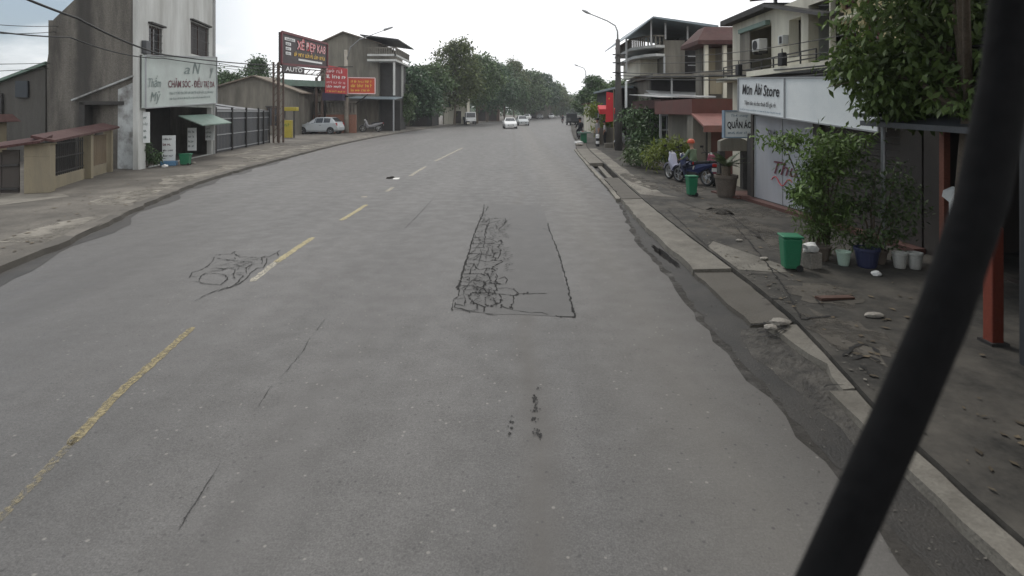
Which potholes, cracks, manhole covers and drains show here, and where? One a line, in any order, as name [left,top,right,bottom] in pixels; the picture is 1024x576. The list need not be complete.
crack [451,207,576,318]
pothole [650,245,681,269]
